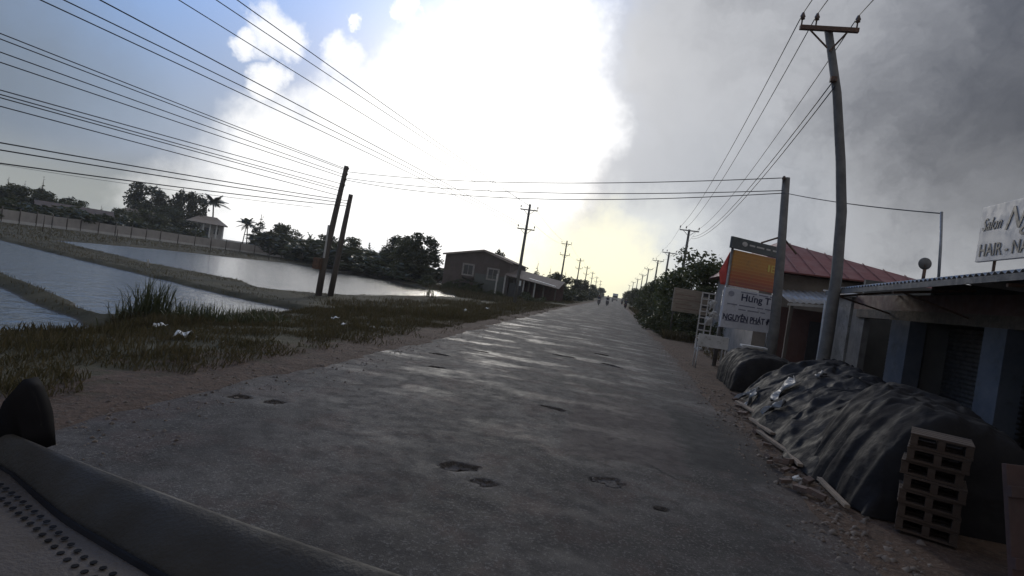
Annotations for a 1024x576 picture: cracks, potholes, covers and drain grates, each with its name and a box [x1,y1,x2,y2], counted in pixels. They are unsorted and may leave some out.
pothole [592,477,625,489]
pothole [436,461,483,472]
pothole [472,479,498,488]
